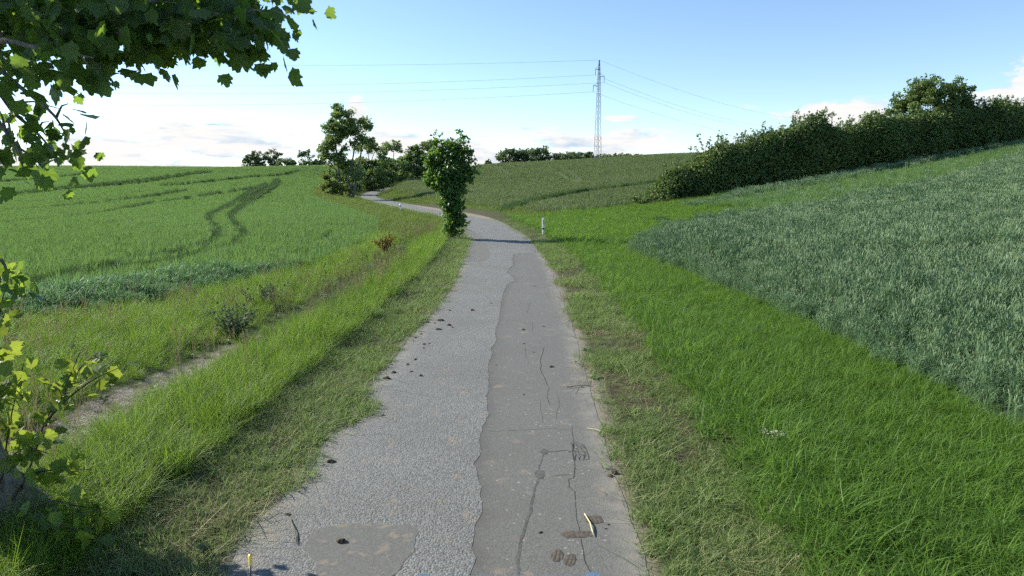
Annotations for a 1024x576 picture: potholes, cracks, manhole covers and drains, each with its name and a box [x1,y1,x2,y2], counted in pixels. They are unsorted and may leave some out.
crack [487,348,590,571]
